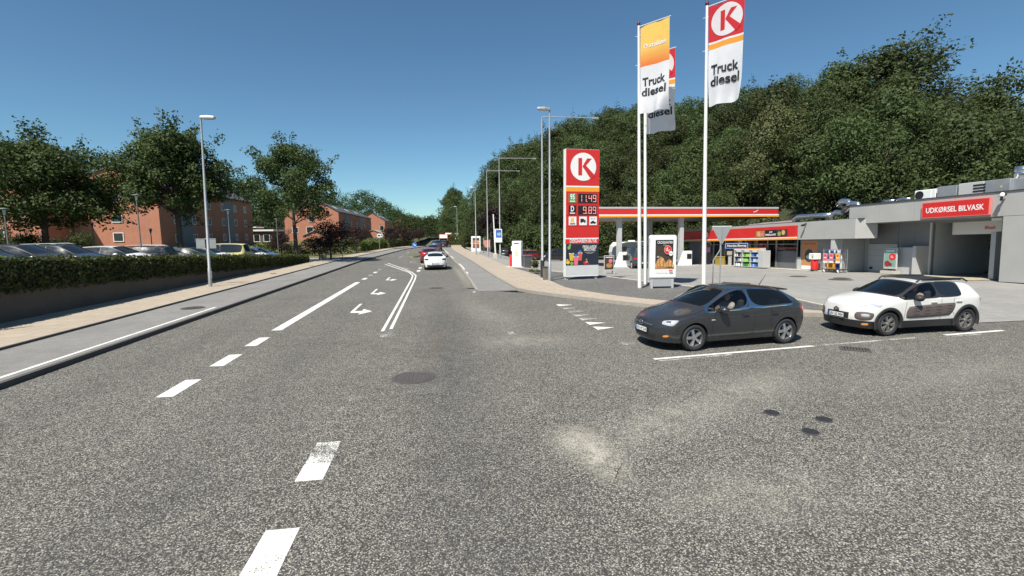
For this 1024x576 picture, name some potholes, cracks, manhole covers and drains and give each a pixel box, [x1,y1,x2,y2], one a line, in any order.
manhole cover [391,371,436,384]
